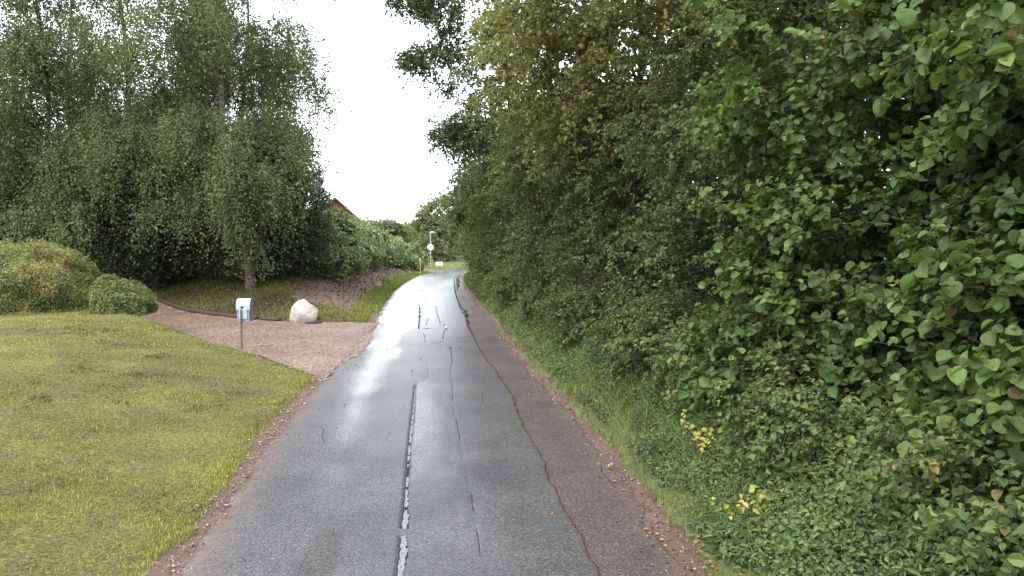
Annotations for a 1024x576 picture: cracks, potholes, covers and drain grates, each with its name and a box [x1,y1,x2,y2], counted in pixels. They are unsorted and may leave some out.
crack [417,277,474,343]
